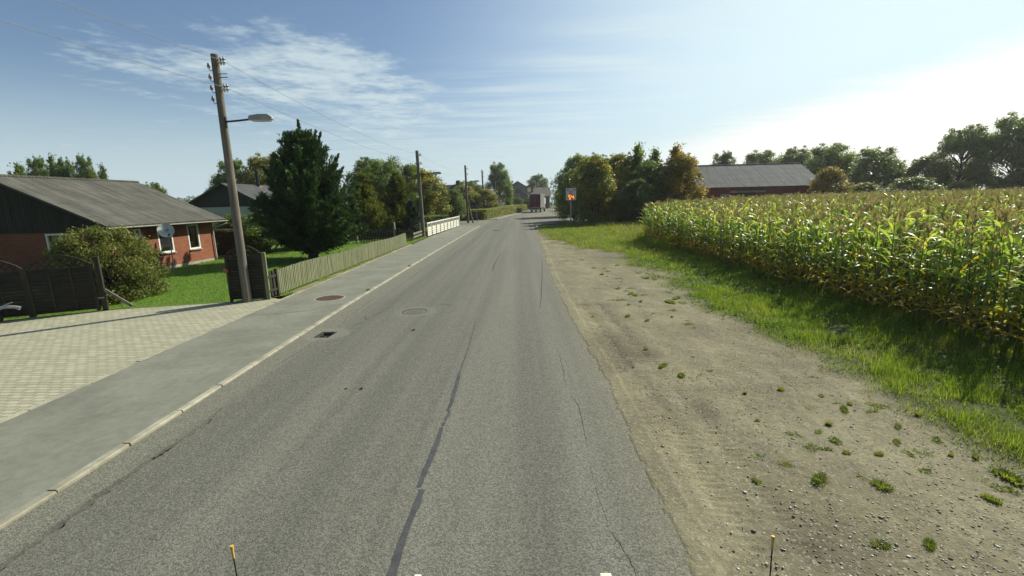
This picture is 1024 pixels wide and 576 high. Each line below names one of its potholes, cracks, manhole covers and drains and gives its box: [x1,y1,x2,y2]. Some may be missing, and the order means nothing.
crack [0,409,221,572]
crack [556,348,636,575]
